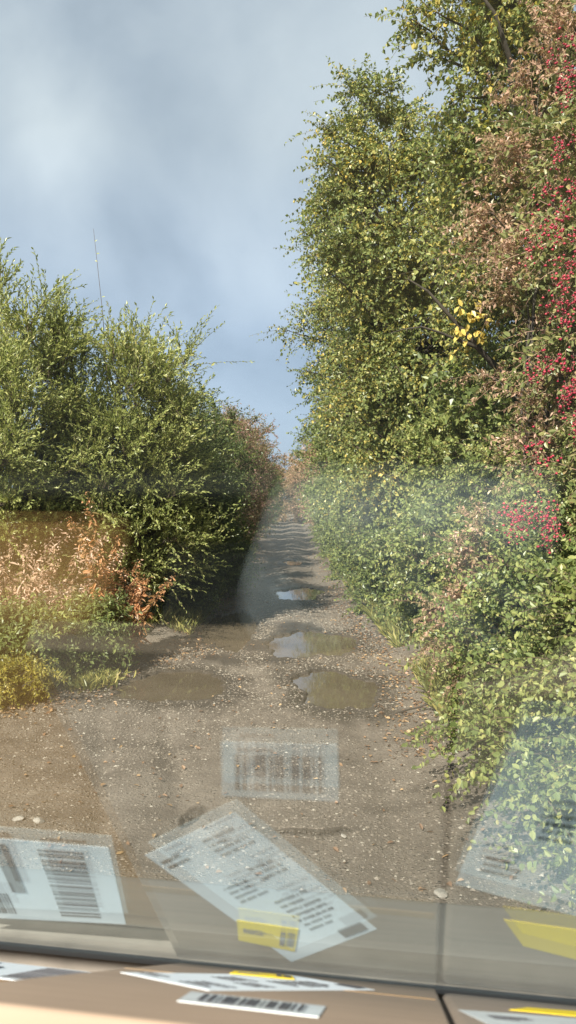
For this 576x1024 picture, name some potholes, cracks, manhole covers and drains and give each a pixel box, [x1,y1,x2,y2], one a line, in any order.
pothole [271,586,329,601]
pothole [259,628,364,660]
pothole [104,668,232,704]
pothole [287,668,386,712]
